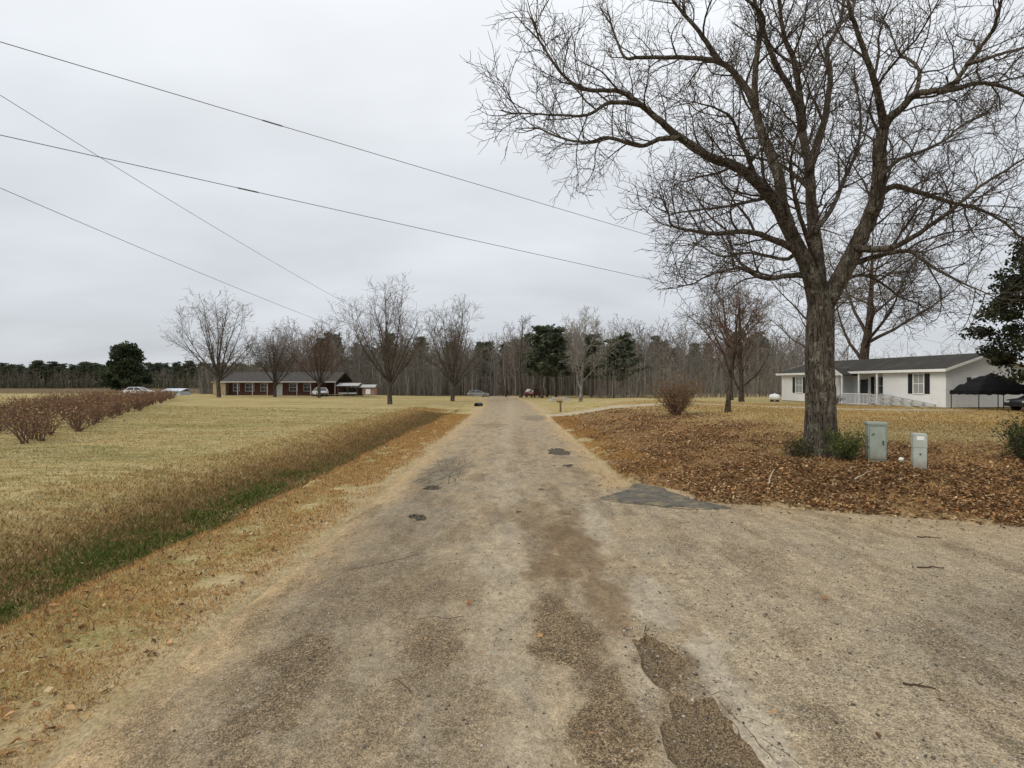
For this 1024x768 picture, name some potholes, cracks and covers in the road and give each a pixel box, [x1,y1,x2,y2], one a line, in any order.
pothole [546,448,573,456]
crack [332,551,431,572]
pothole [405,513,430,522]
pothole [627,631,692,695]
pothole [652,692,773,768]
